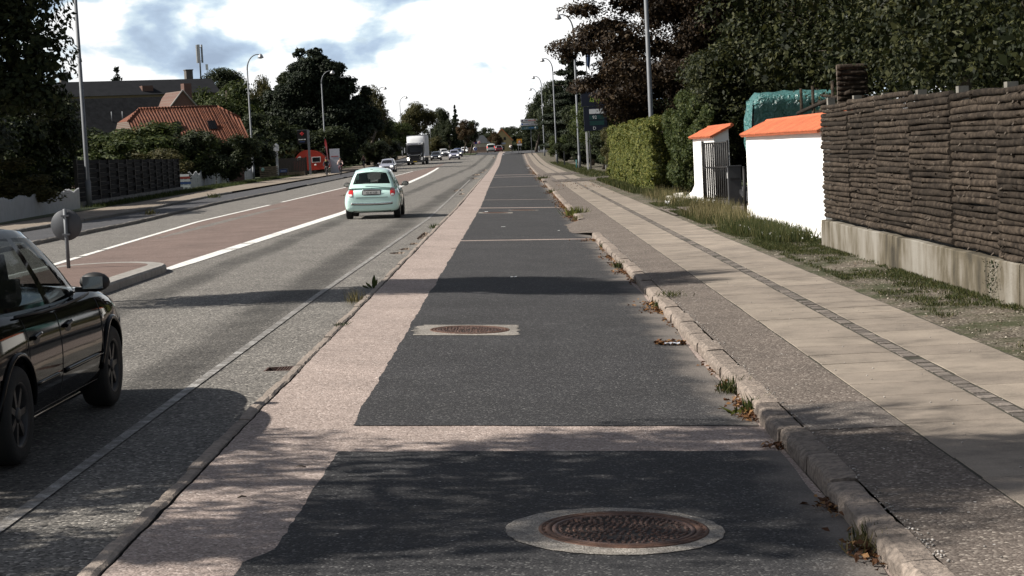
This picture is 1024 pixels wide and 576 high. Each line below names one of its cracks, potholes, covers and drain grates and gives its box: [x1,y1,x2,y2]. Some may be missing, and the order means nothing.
manhole cover [505,508,725,555]
manhole cover [411,325,519,335]
